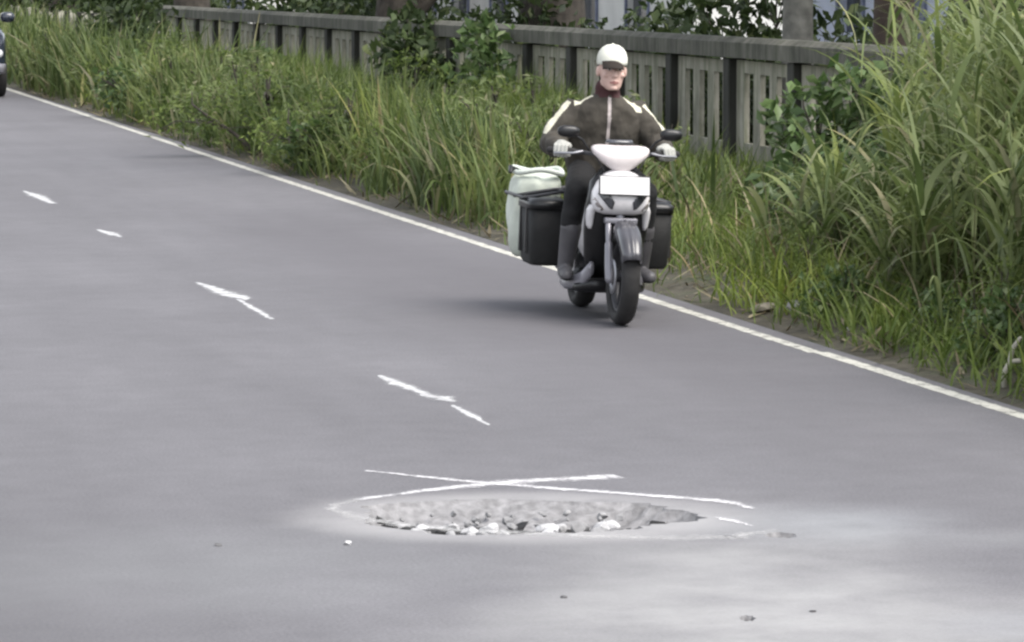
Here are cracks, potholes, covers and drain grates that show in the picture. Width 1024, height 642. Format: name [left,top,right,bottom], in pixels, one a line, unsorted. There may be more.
pothole [361,499,707,535]
